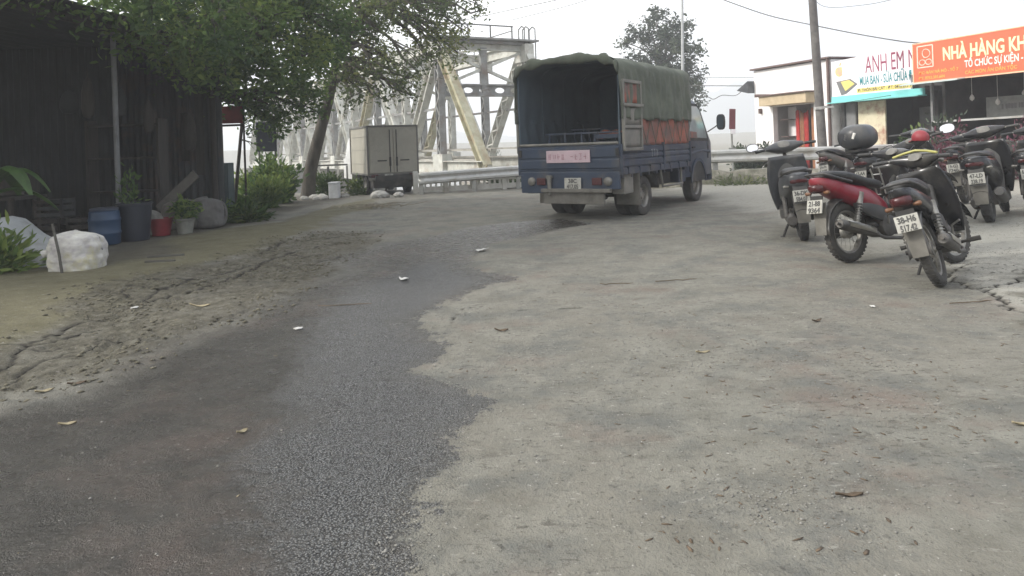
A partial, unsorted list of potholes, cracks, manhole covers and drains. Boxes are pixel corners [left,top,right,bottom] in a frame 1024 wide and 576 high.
crack [948,267,1021,311]
crack [5,324,141,381]
